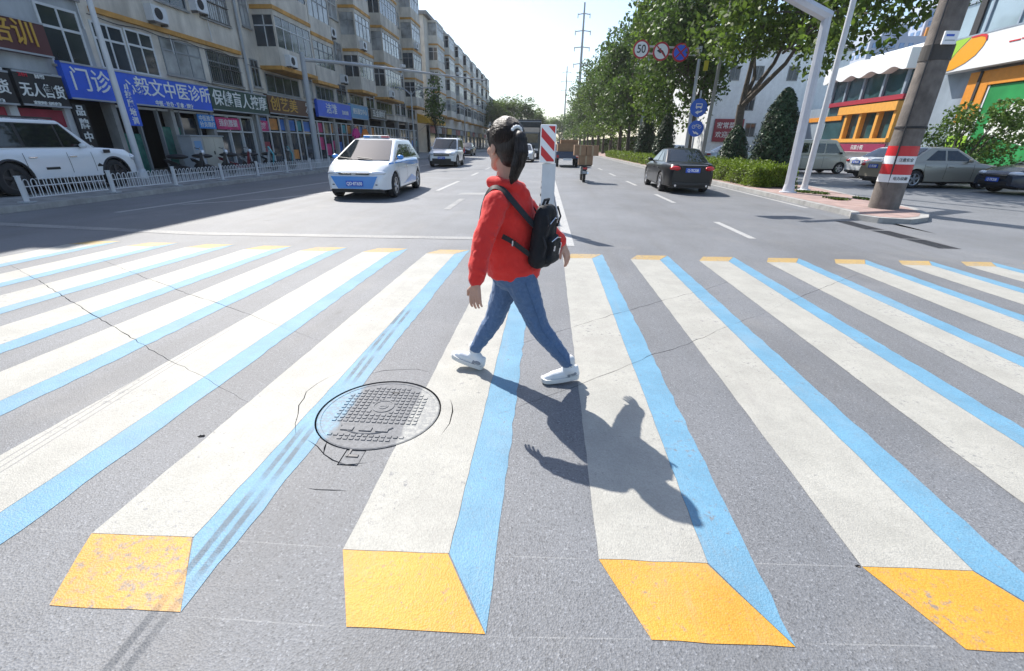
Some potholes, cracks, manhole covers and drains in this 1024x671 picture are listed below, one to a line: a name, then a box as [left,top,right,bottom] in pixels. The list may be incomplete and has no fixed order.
crack [14,267,243,400]
crack [295,369,453,466]
manhole cover [314,381,441,466]
